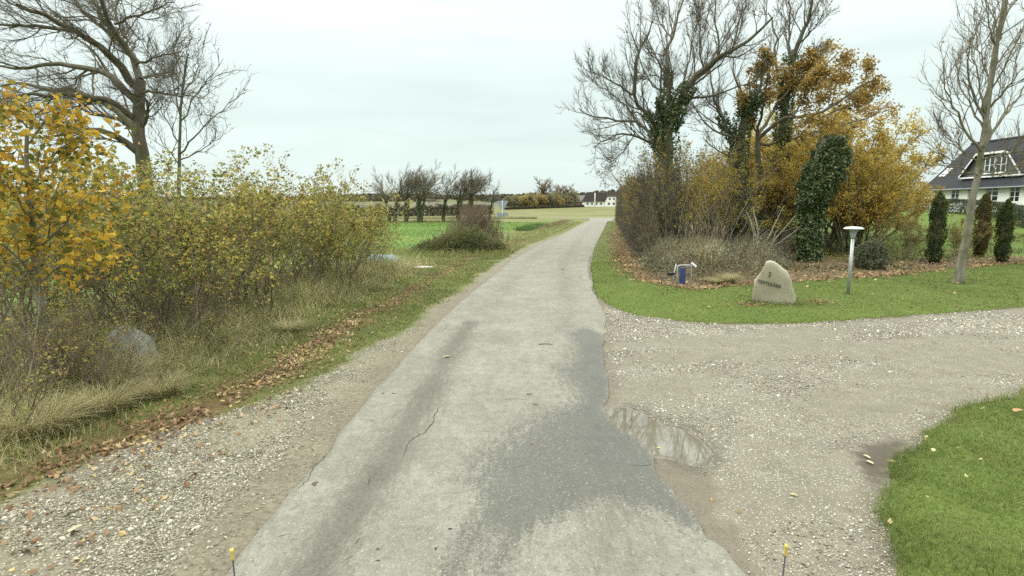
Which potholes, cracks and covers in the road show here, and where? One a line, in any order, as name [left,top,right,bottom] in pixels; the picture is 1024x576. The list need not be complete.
pothole [604,403,717,468]
crack [403,409,438,456]
